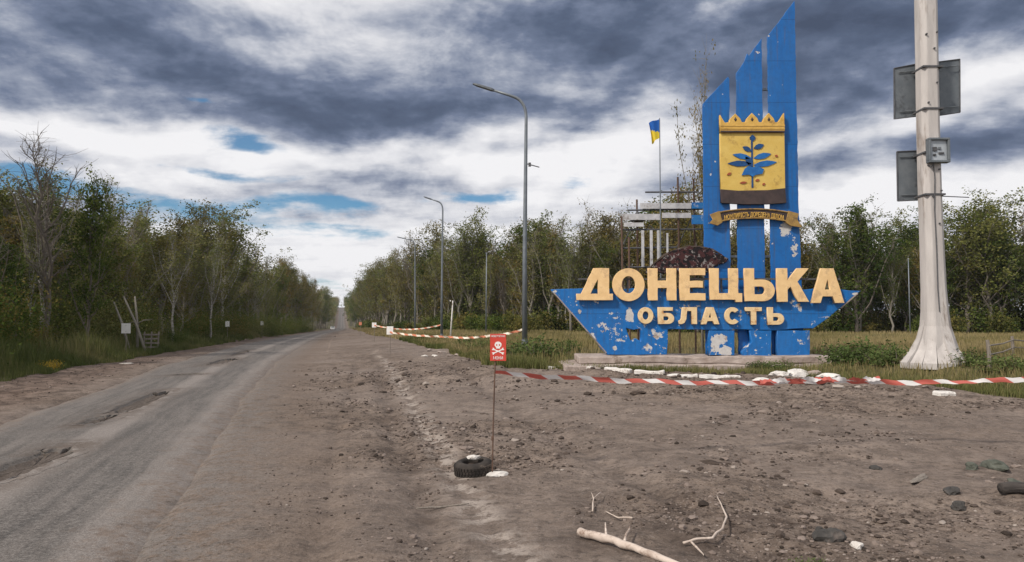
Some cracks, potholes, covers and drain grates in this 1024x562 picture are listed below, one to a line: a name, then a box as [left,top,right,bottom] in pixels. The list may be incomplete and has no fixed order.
pothole [101,390,175,414]
pothole [0,445,89,484]
